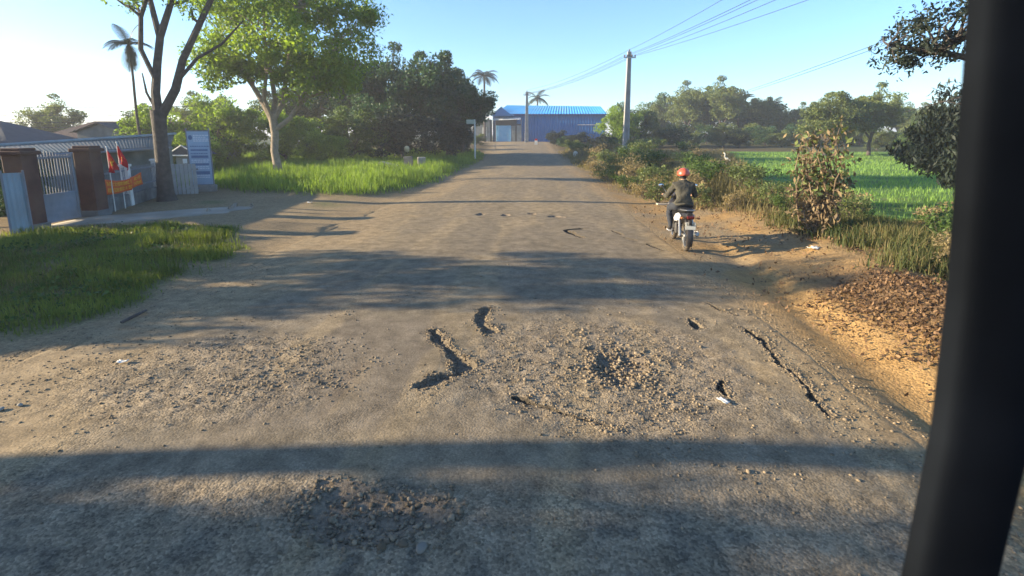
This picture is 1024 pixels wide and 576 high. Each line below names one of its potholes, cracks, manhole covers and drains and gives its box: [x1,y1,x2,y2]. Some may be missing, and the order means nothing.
pothole [473,307,503,334]
crack [563,228,586,238]
pothole [412,329,477,389]
pothole [588,352,653,387]
crack [707,303,831,417]
